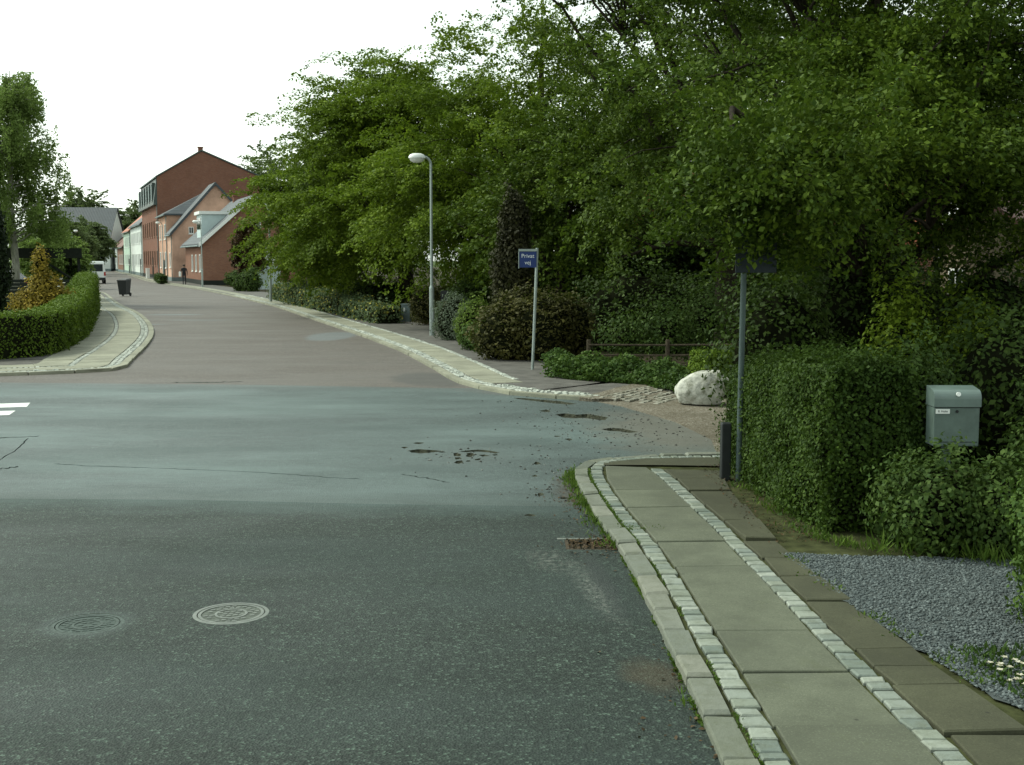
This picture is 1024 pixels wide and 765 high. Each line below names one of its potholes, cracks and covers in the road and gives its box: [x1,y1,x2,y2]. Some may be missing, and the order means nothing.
manhole cover [50,614,125,635]
crack [0,436,37,469]
drain grate [557,538,614,550]
pothole [441,450,499,464]
crack [62,464,358,479]
manhole cover [193,603,269,625]
